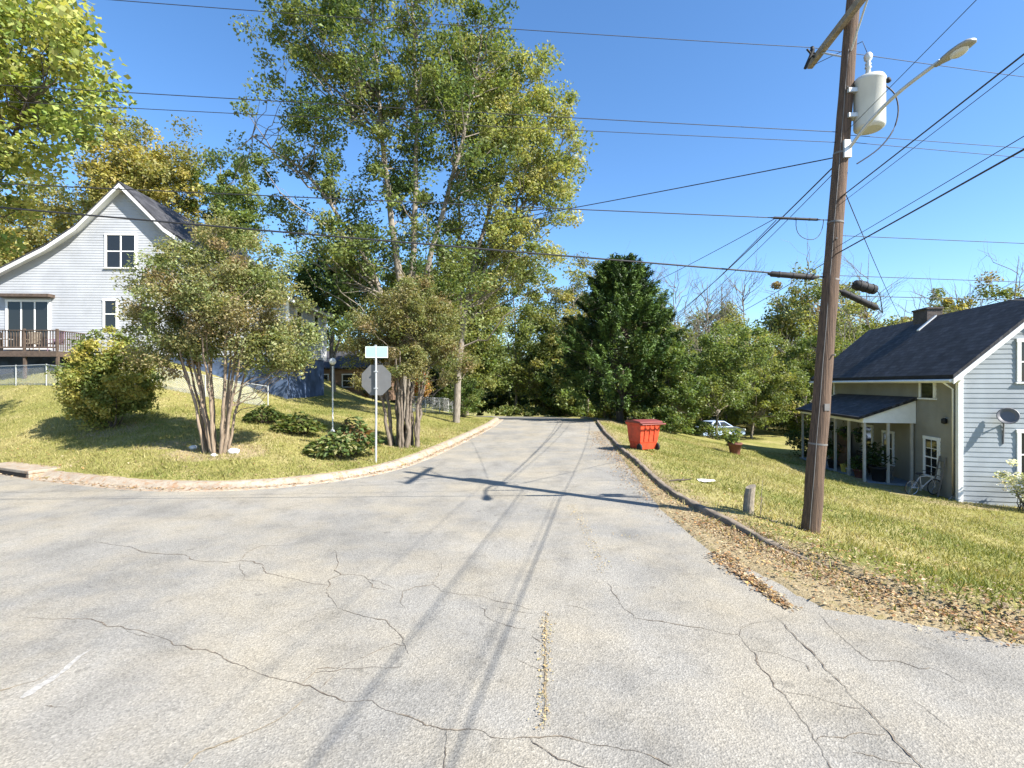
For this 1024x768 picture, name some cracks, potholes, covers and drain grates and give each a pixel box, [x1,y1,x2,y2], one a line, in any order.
crack [610,585,963,768]
crack [111,544,408,652]
crack [40,618,672,768]
